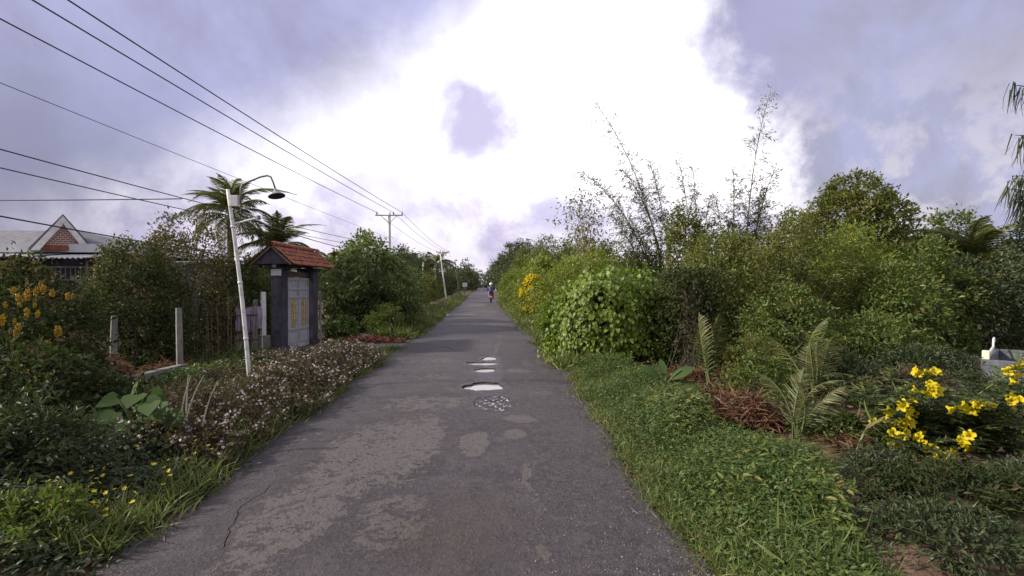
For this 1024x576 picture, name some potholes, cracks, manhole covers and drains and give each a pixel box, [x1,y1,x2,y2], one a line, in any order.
pothole [462,382,504,391]
pothole [473,395,512,413]
crack [217,484,272,553]
